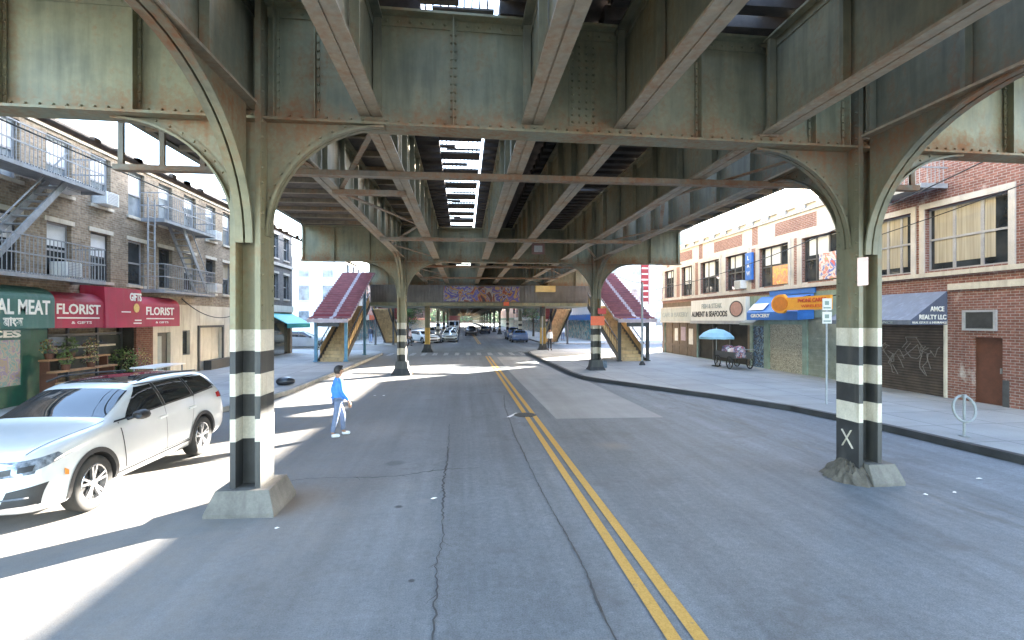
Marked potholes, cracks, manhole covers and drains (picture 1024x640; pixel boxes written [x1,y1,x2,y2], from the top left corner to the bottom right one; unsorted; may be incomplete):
crack [292,424,479,640]
